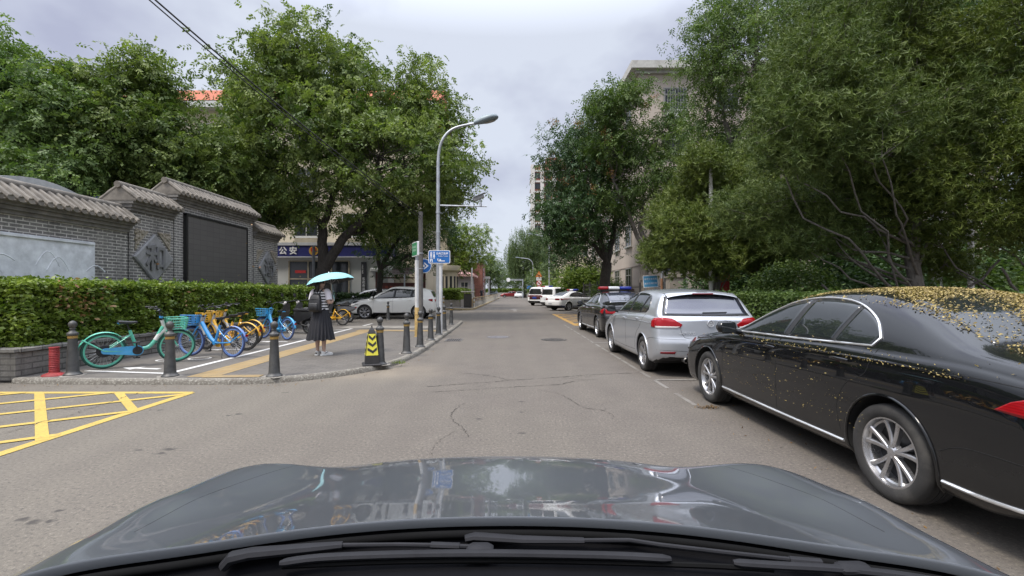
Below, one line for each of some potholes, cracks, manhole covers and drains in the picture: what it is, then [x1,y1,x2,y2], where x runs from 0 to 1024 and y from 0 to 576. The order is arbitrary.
crack [427,373,615,454]
